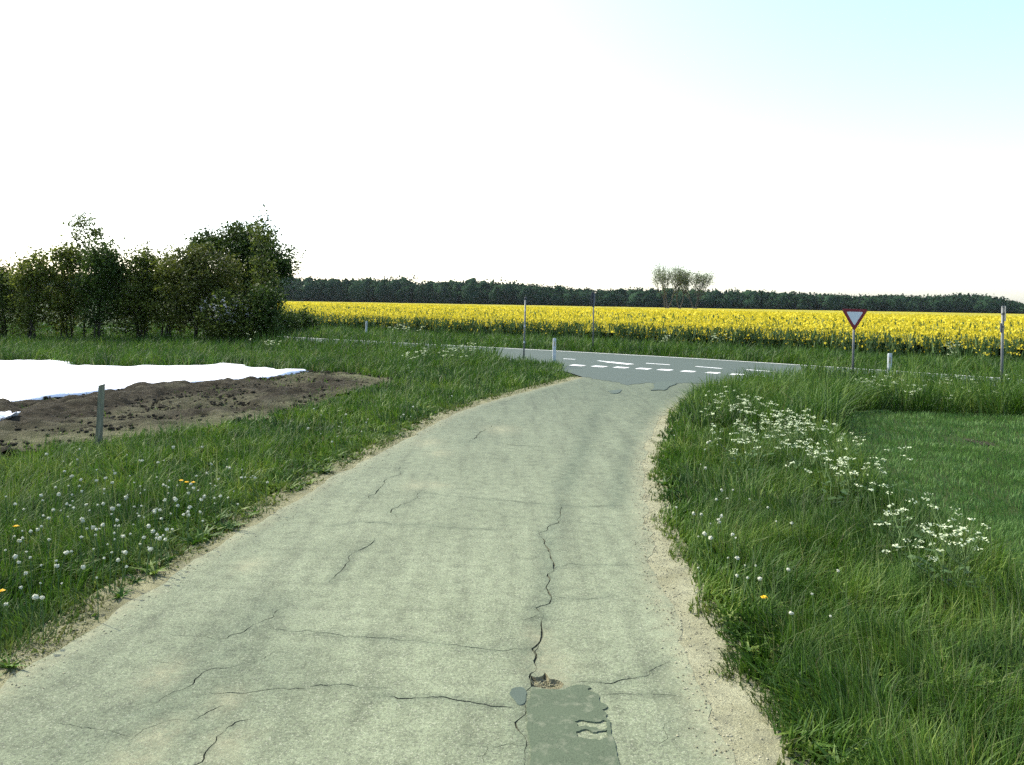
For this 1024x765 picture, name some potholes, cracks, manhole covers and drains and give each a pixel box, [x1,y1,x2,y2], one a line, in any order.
crack [564,661,682,697]
pothole [530,673,564,689]
crack [168,609,528,651]
crack [52,654,376,765]
crack [331,469,626,765]
